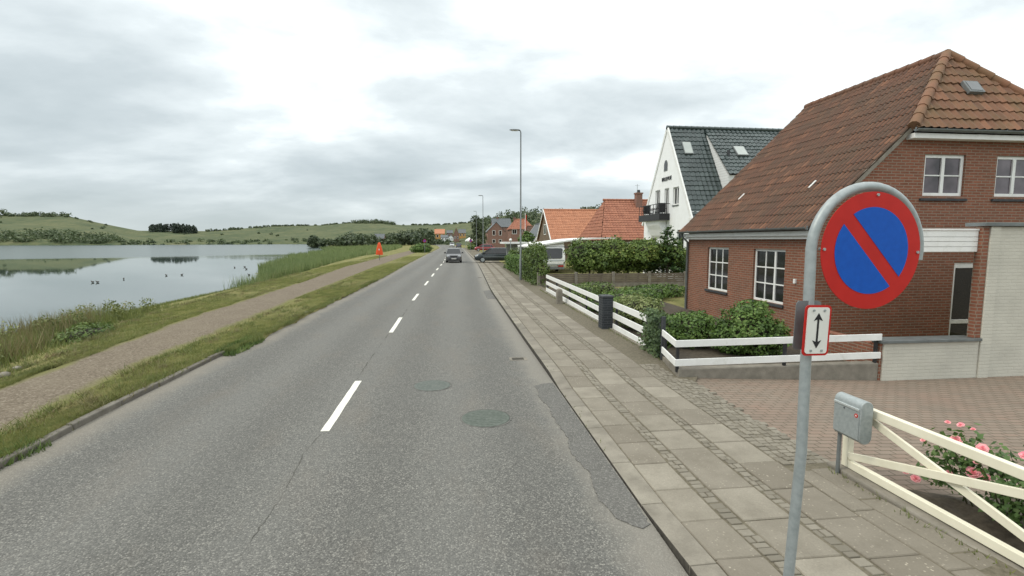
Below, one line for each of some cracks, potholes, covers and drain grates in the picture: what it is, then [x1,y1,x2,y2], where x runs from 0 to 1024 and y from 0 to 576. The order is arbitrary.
crack [231,434,321,575]
manhole cover [412,380,452,391]
manhole cover [460,409,512,428]
